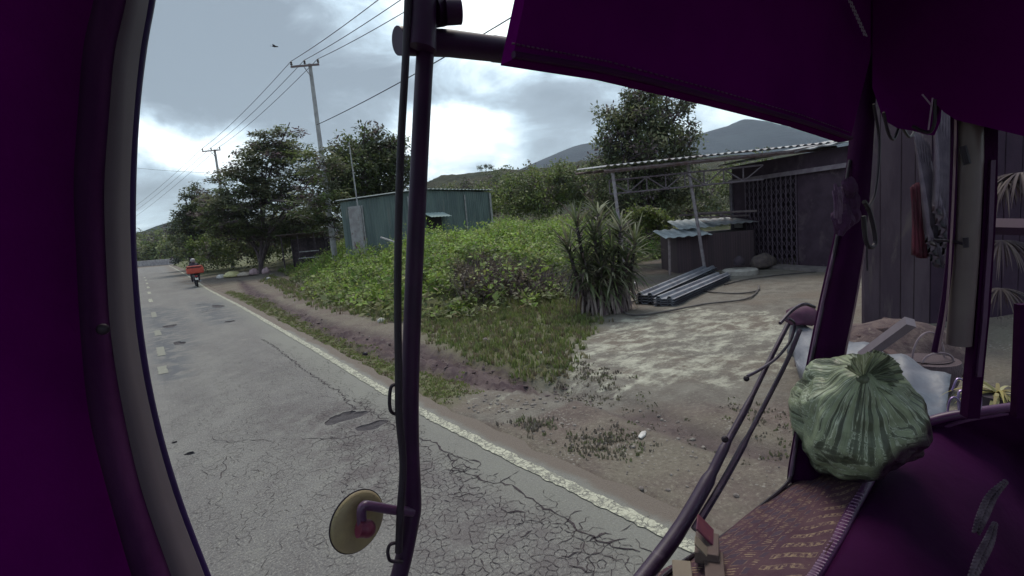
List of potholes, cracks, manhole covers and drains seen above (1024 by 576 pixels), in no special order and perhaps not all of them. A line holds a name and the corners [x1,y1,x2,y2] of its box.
crack [184,339,652,576]
pothole [325,411,369,425]
pothole [355,420,389,431]
